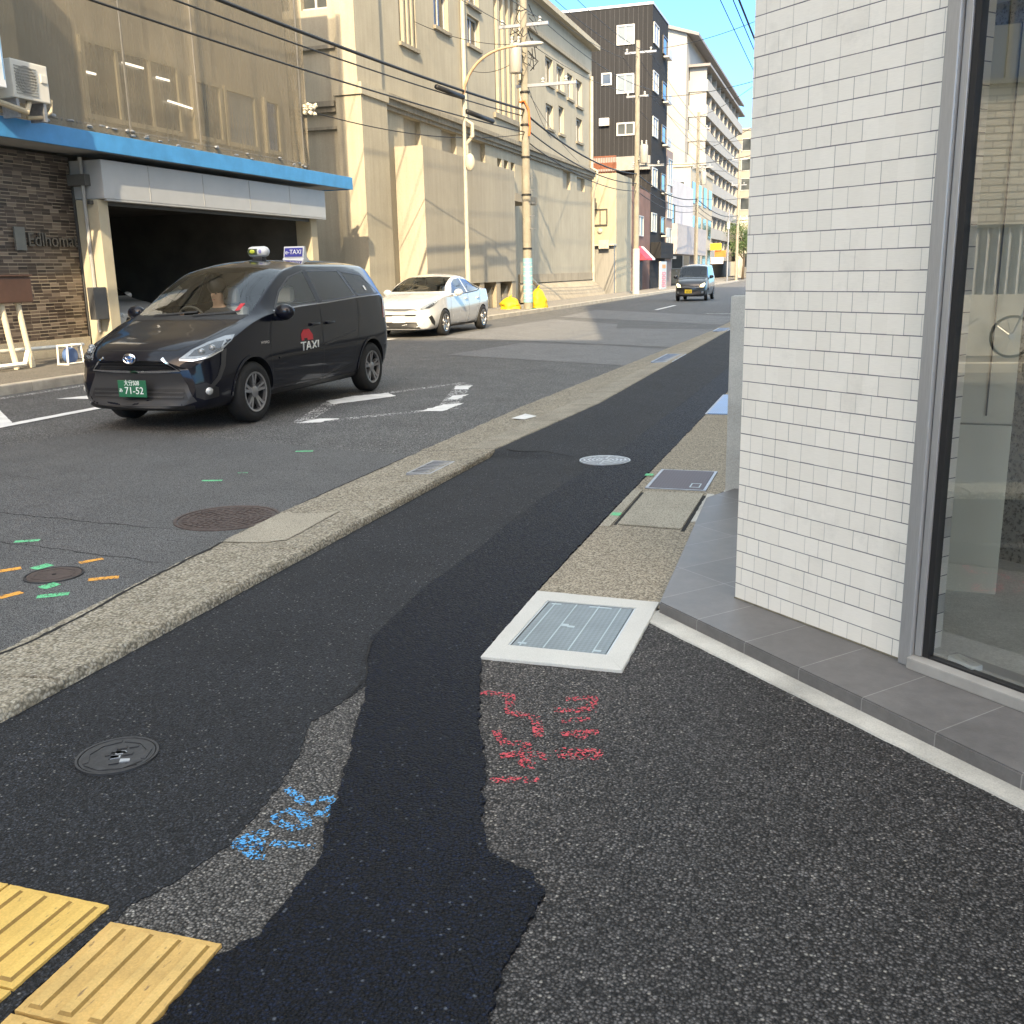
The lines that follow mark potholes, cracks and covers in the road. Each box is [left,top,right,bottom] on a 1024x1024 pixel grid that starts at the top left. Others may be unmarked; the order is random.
drain grate [406,460,455,475]
crack [0,512,186,530]
drain grate [651,354,686,363]
manhole cover [74,736,159,776]
manhole cover [173,505,280,531]
utility cover [645,469,718,491]
manhole cover [579,455,630,465]
crack [0,541,171,564]
manhole cover [23,566,85,584]
